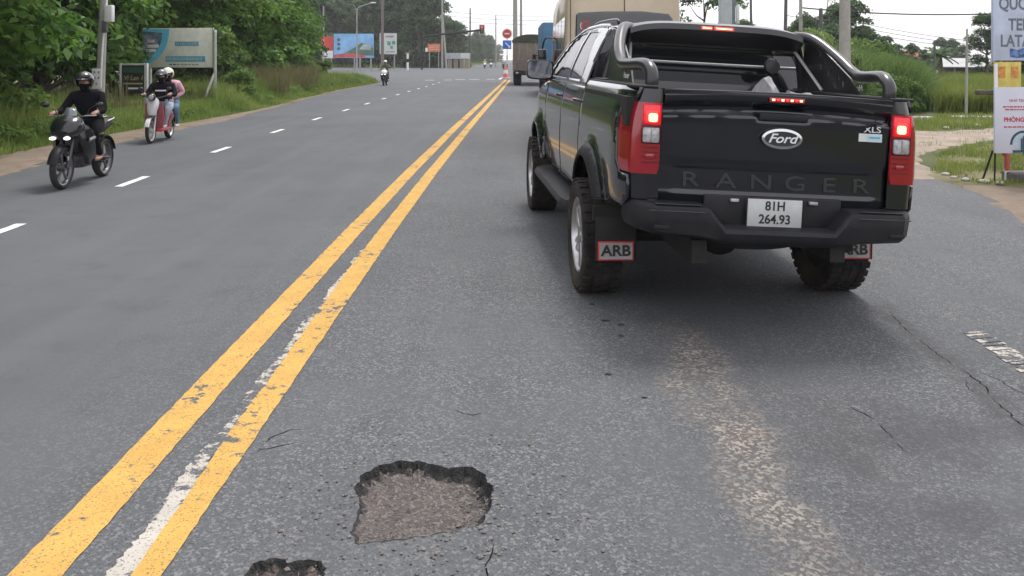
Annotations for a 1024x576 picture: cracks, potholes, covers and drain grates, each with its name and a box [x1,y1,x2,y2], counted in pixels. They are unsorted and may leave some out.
crack [257,428,313,452]
crack [848,405,906,452]
crack [485,544,494,576]
crack [891,312,1024,426]
pothole [350,460,494,545]
pothole [244,558,327,576]
